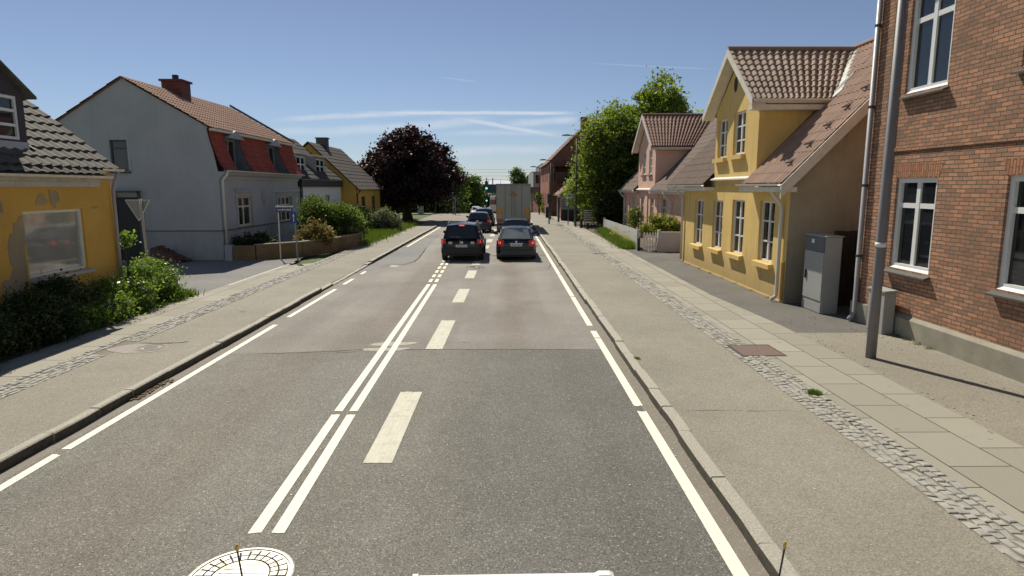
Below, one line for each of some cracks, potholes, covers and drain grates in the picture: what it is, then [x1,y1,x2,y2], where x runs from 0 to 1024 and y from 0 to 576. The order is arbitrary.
manhole cover [188,547,295,576]
manhole cover [727,344,787,356]
